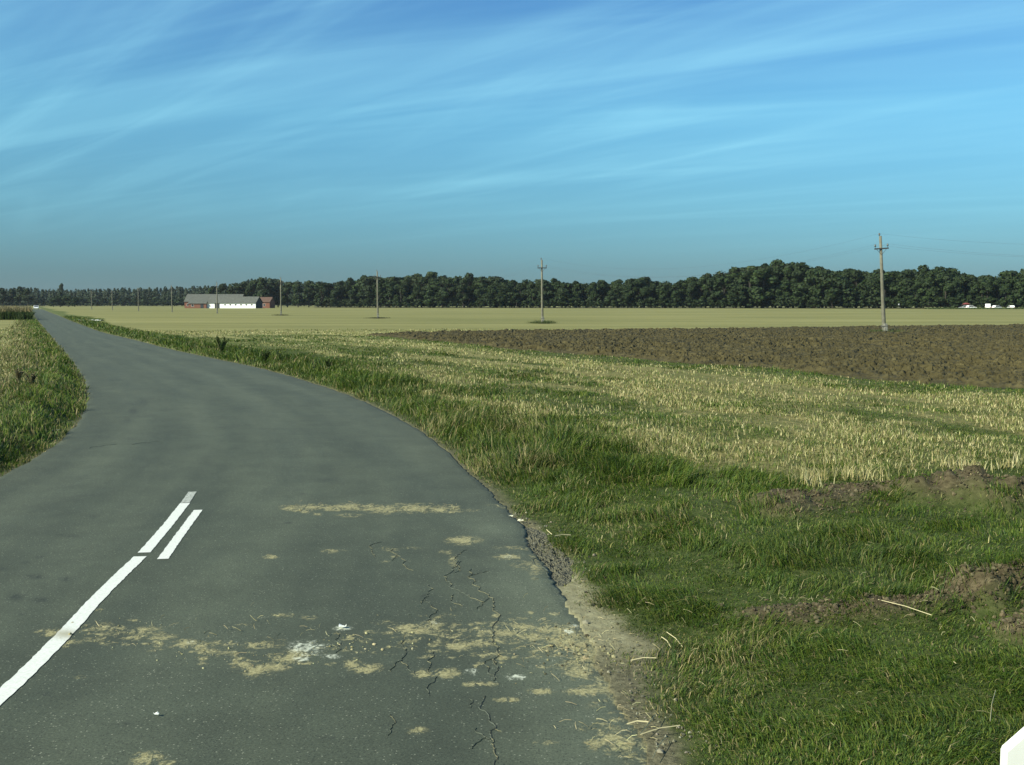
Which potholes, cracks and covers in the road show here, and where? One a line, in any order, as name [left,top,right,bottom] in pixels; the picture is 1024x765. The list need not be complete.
pothole [524,527,574,586]
crack [421,550,502,765]
crack [390,641,443,695]
